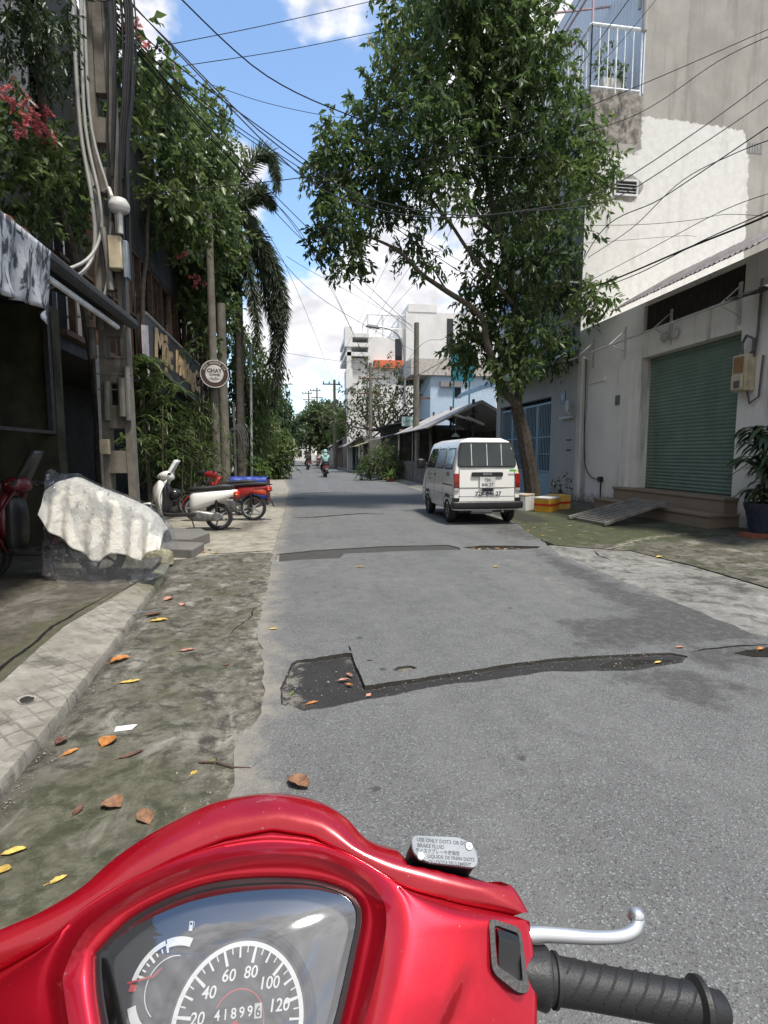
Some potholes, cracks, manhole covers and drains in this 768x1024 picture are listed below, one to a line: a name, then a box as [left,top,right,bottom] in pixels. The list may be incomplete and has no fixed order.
pothole [280,653,688,711]
